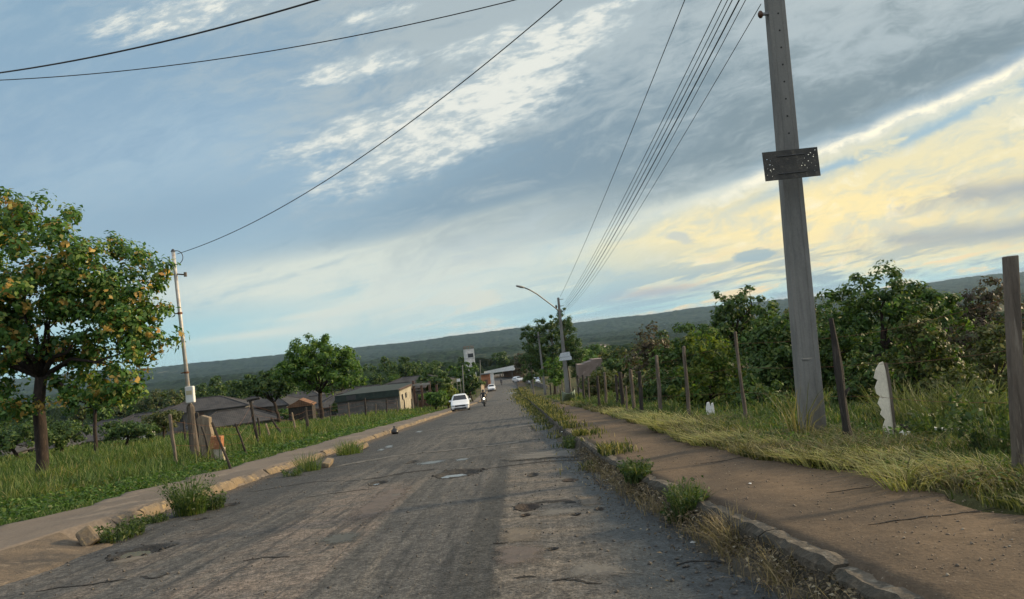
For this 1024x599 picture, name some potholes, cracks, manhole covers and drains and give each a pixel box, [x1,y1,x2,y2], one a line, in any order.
pothole [513,503,543,511]
pothole [104,541,178,561]
crack [868,508,995,525]
pothole [429,468,488,479]
